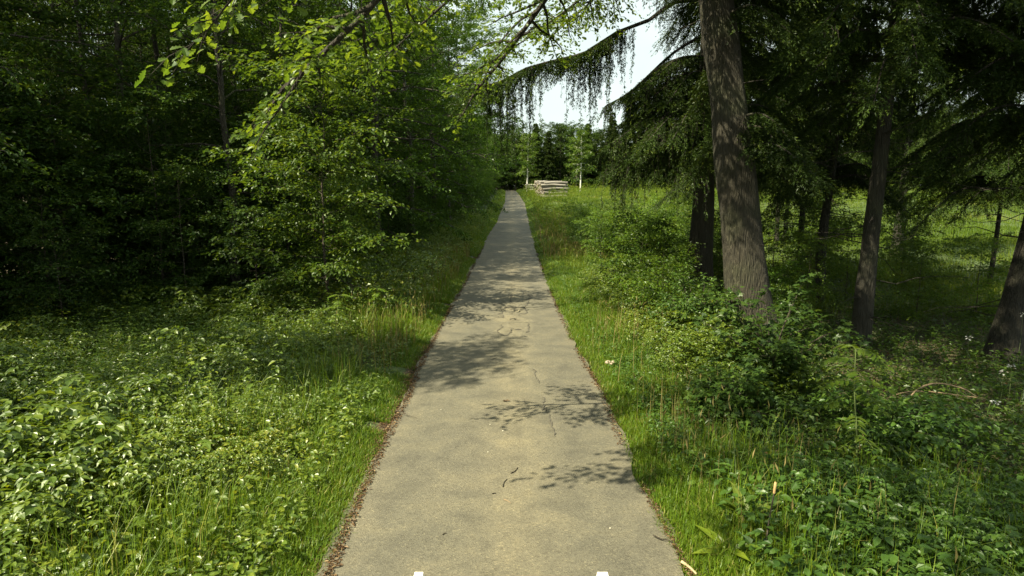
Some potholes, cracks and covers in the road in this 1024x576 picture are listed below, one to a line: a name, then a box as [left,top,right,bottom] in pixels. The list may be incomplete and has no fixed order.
crack [532,368,556,436]
crack [495,294,530,336]
